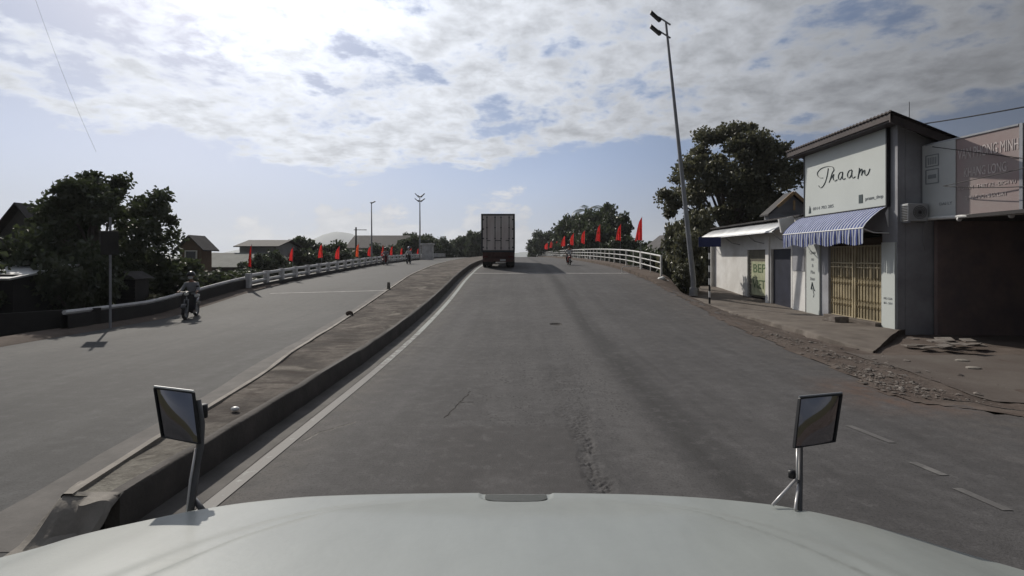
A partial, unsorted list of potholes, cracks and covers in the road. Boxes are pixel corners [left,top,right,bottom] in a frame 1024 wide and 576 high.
crack [444,391,471,418]
